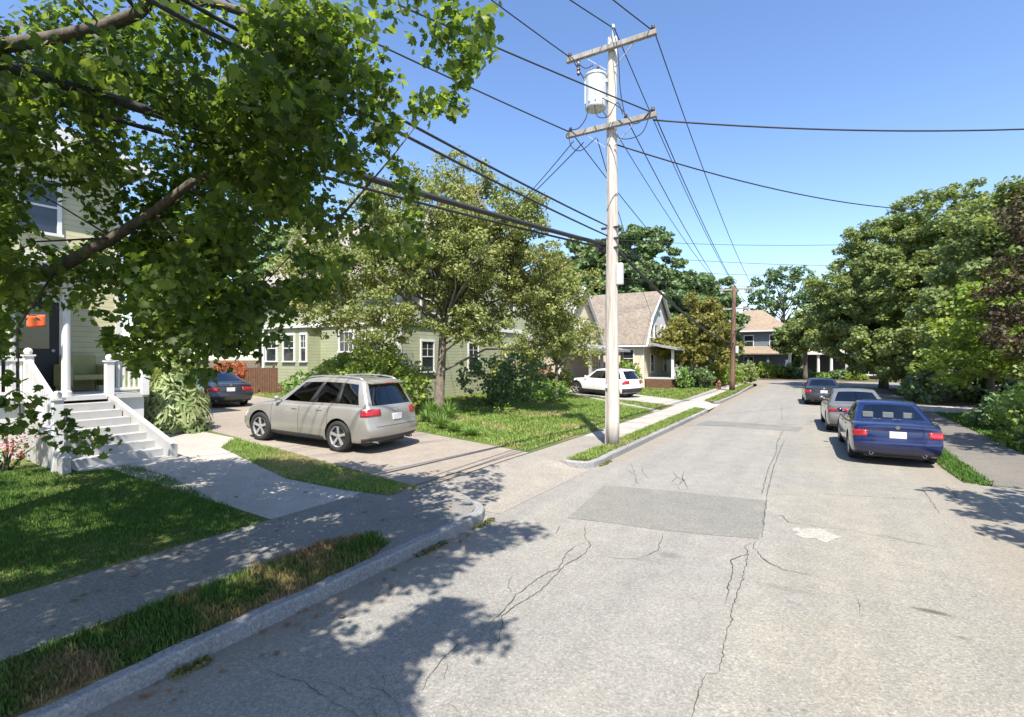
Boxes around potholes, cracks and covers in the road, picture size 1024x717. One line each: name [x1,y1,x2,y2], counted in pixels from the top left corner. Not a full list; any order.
crack [692,407,944,716]
crack [423,528,663,689]
crack [271,667,401,717]
